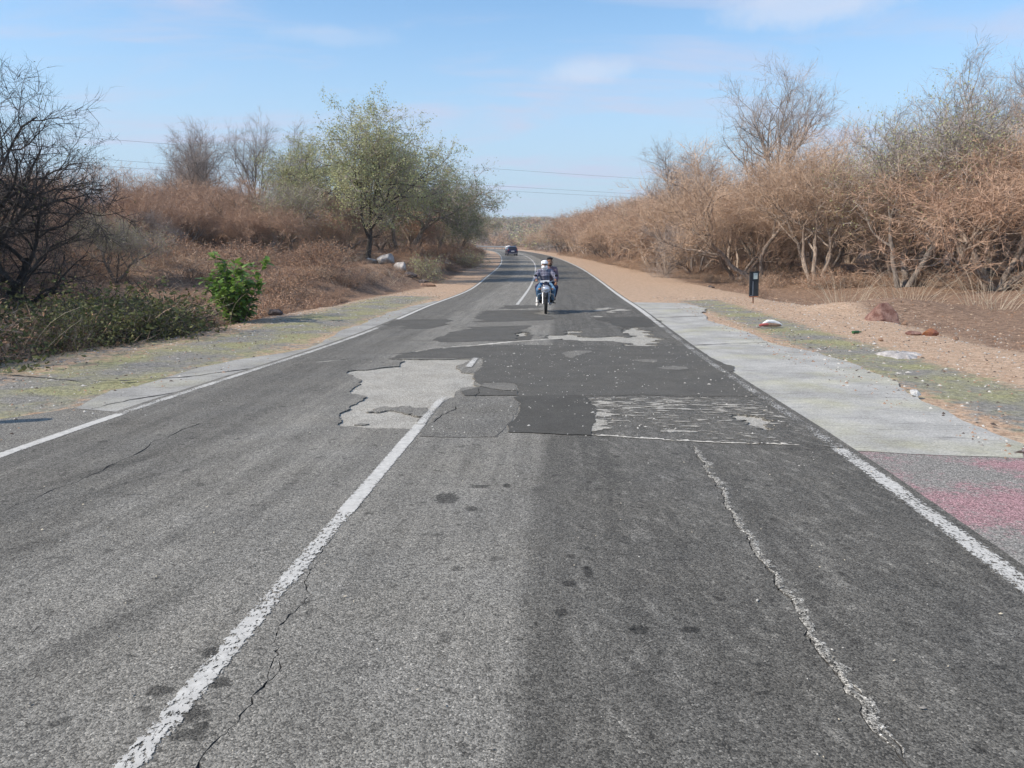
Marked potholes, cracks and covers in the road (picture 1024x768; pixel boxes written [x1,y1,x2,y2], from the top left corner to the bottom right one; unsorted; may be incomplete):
crack [190,536,335,768]
crack [4,421,207,512]
crack [592,434,909,768]
